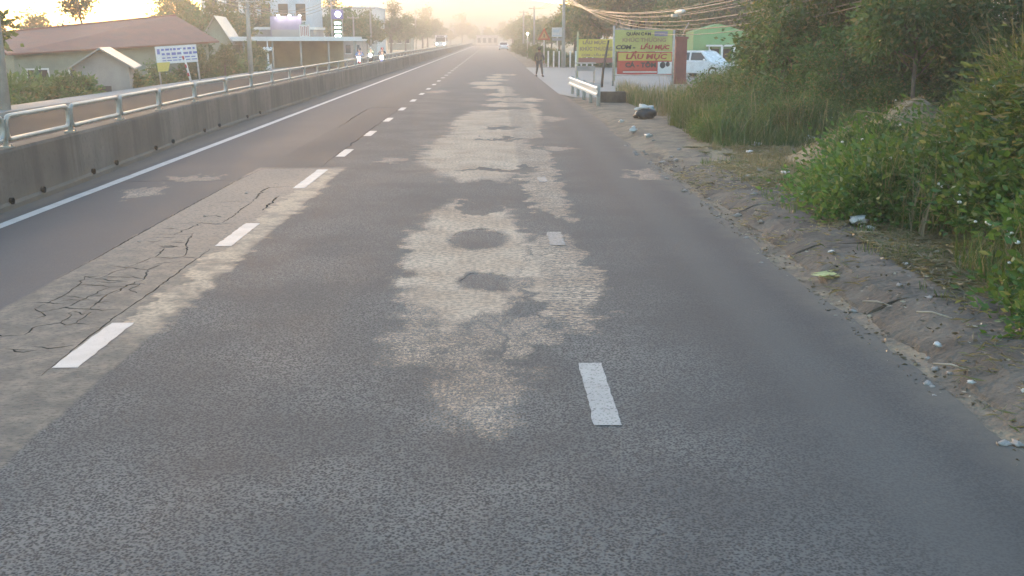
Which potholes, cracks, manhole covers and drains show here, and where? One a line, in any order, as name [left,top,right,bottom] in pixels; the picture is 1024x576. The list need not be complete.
crack [0,168,292,376]
